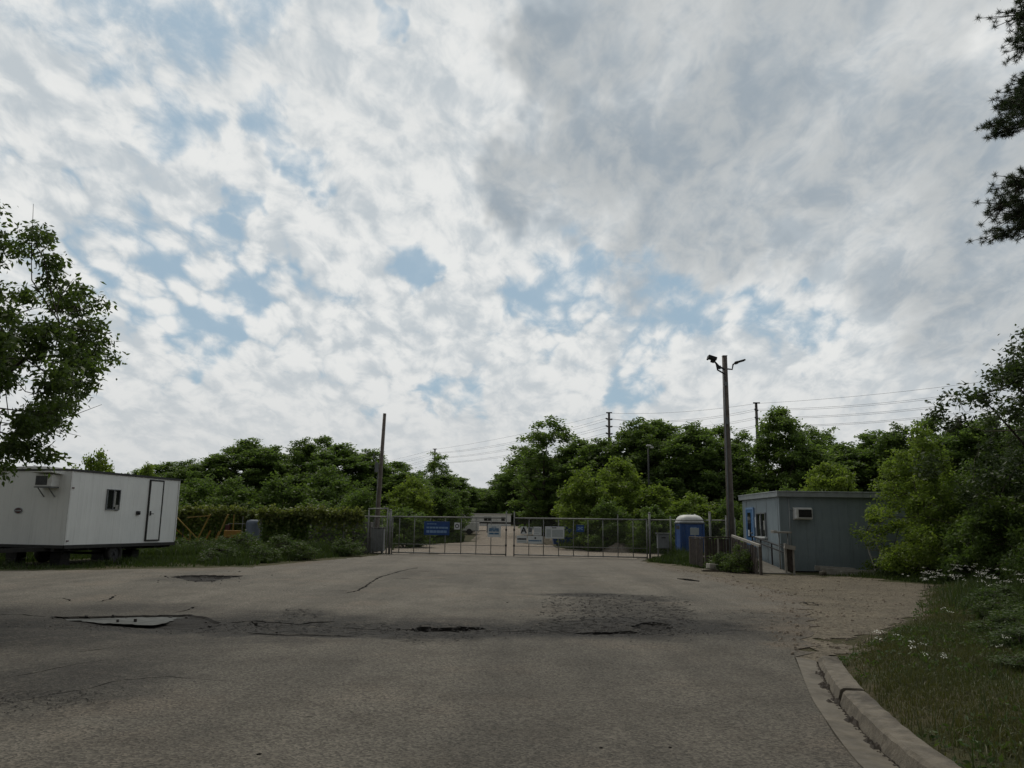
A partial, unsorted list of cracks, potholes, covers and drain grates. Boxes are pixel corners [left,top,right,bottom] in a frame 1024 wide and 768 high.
crack [337,568,431,593]
pothole [631,622,673,631]
crack [175,593,700,643]
